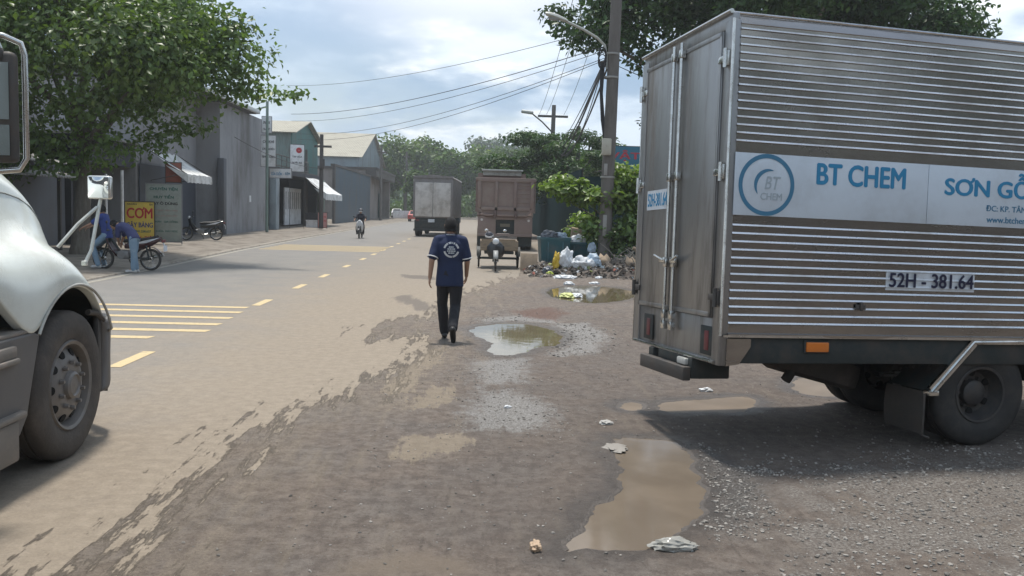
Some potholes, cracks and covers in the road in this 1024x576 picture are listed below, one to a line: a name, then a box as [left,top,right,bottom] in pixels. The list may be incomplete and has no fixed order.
pothole [561,436,711,552]
pothole [545,285,634,303]
pothole [655,395,760,413]
pothole [466,322,566,355]
pothole [788,377,835,397]
pothole [616,401,648,411]
